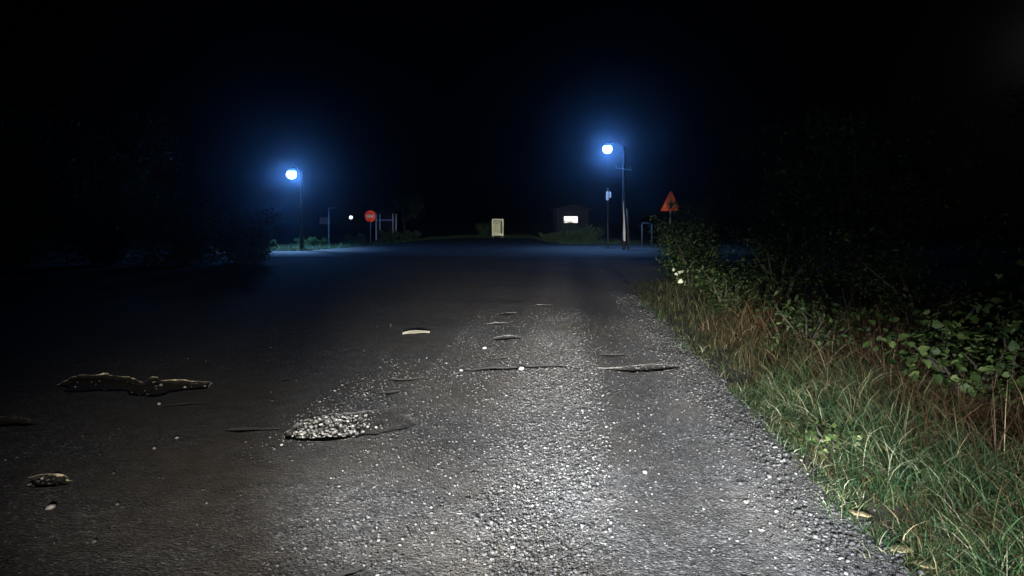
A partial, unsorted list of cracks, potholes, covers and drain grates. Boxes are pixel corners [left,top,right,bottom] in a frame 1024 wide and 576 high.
pothole [25,473,72,488]
pothole [56,373,212,397]
crack [456,353,625,371]
crack [381,377,427,395]
pothole [282,406,419,442]
